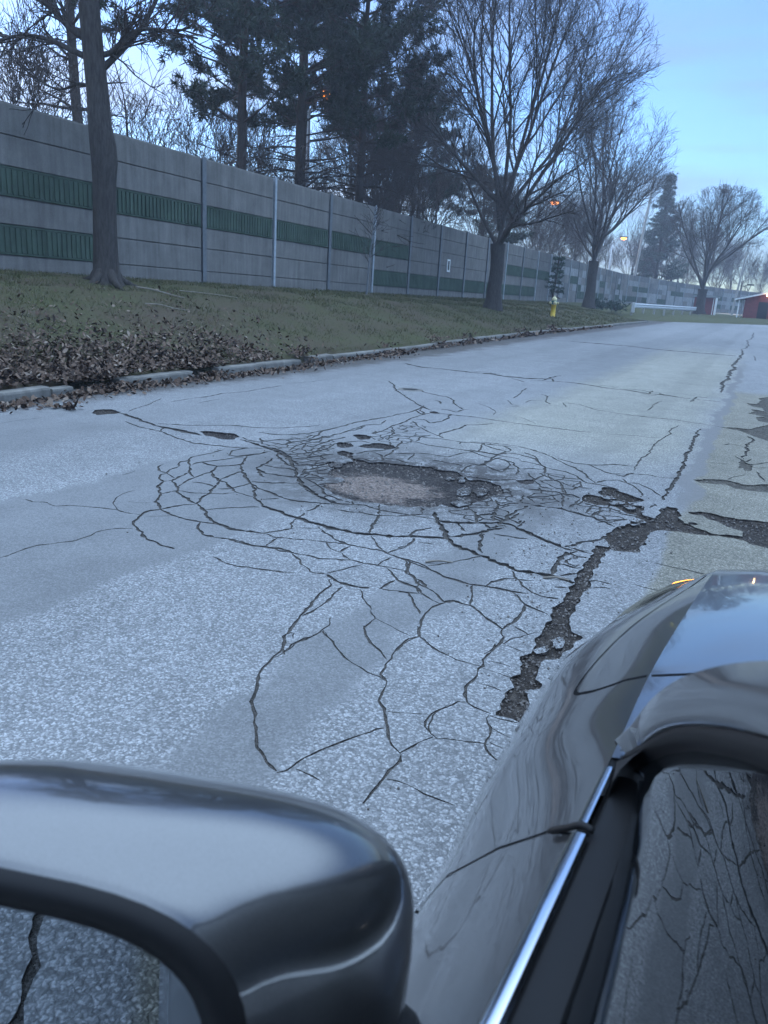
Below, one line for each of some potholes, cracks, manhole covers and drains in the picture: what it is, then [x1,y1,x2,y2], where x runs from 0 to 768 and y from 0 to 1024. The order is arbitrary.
pothole [323,451,504,508]
crack [0,363,718,805]
pothole [200,431,239,440]
crack [708,436,768,481]
